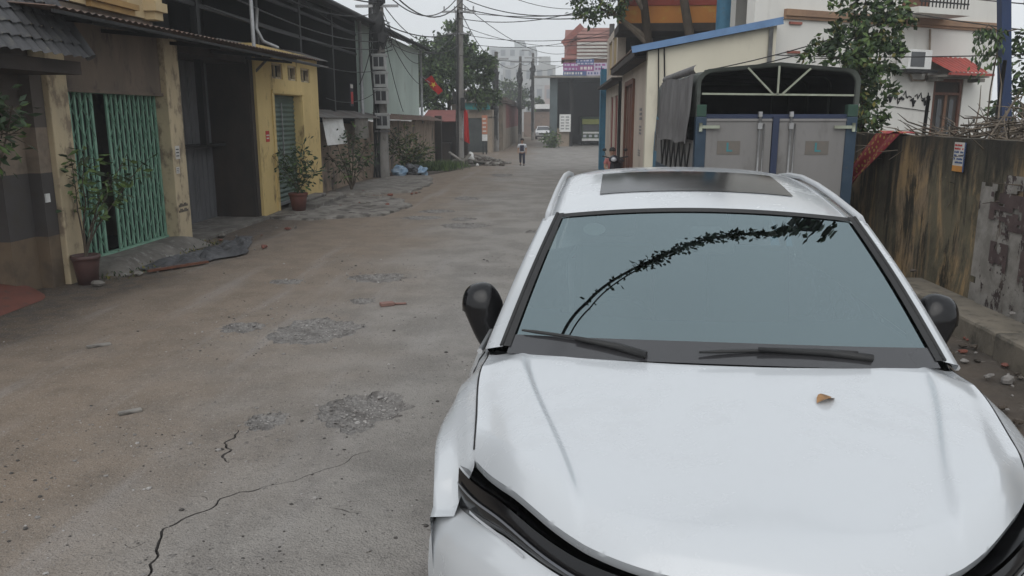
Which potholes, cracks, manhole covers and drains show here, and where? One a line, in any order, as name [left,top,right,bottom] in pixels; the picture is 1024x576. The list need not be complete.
pothole [307,388,416,436]
pothole [346,271,417,283]
pothole [258,315,367,348]
pothole [215,322,270,333]
crack [221,430,239,463]
pothole [238,409,290,433]
crack [125,451,370,576]
